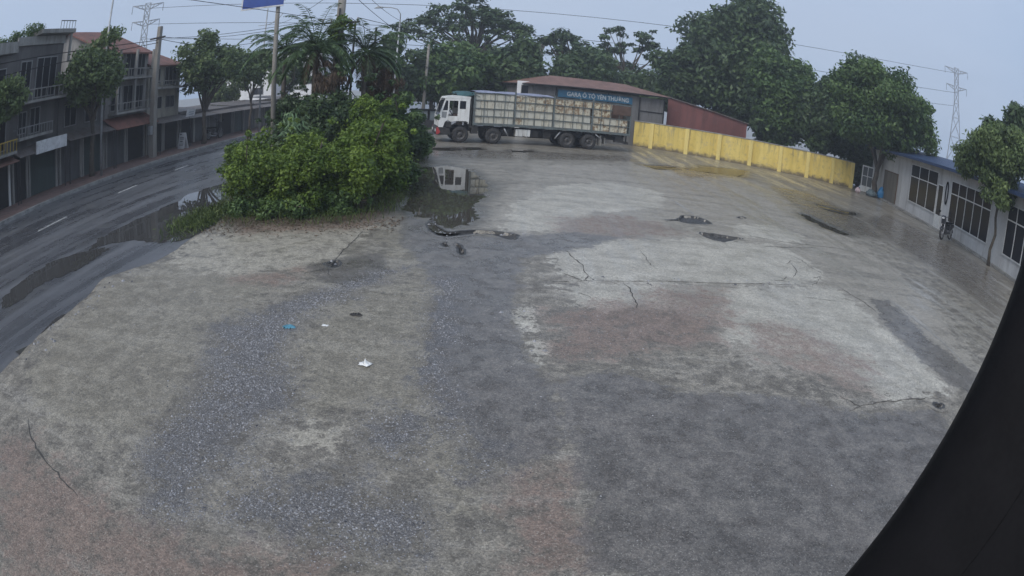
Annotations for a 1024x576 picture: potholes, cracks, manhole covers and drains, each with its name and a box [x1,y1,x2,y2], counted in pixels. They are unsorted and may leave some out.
pothole [421,220,524,242]
pothole [661,214,717,226]
crack [740,231,873,309]
pothole [695,231,747,243]
crack [28,423,77,495]
crack [842,397,927,411]
